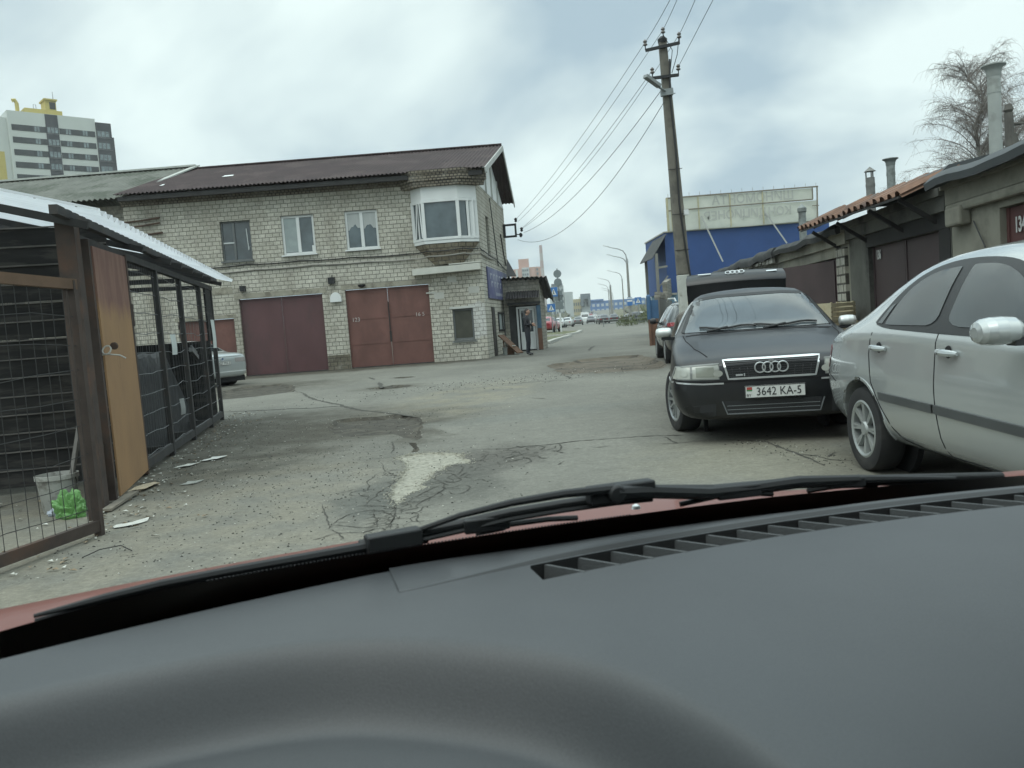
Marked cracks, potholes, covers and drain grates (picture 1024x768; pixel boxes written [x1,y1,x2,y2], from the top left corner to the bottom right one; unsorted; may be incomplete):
crack [313,435,720,540]
crack [721,438,836,465]
pothole [327,414,425,440]
crack [228,377,415,417]
